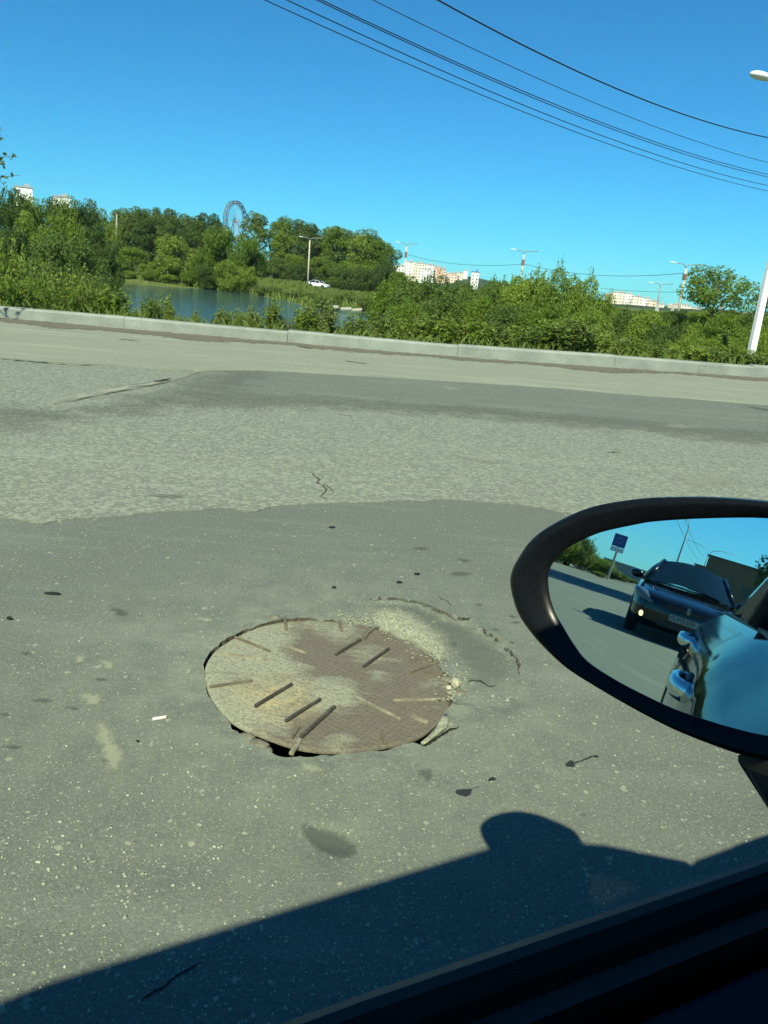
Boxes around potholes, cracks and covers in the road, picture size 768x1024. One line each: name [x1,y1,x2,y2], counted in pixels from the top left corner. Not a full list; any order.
crack [309,471,334,500]
manhole cover [205,617,451,756]
crack [140,962,201,1002]
crack [368,597,521,687]
